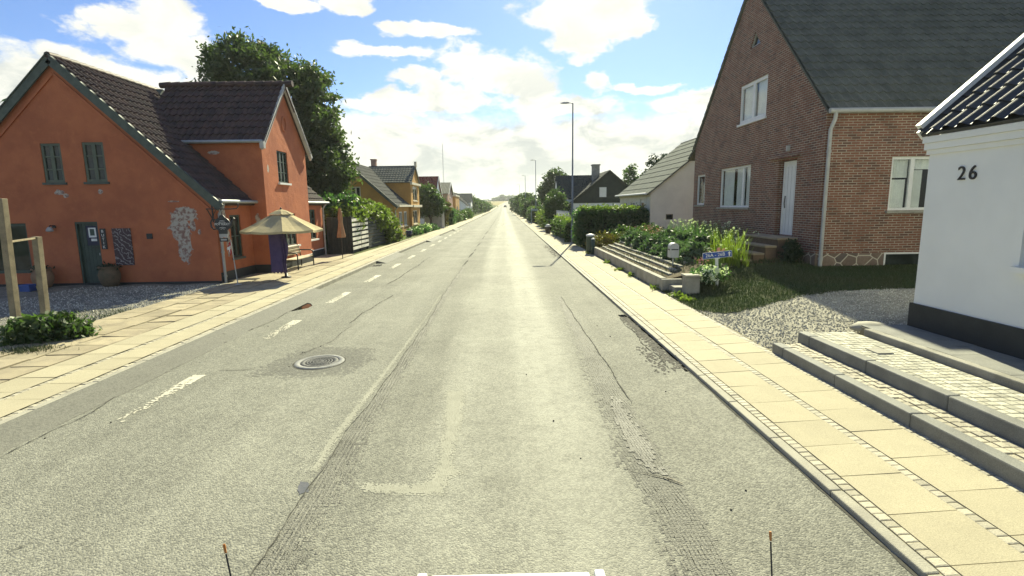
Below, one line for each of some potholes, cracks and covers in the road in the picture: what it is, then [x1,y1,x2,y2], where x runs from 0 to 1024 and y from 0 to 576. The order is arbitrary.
crack [561,297,632,402]
manhole cover [293,355,346,370]
